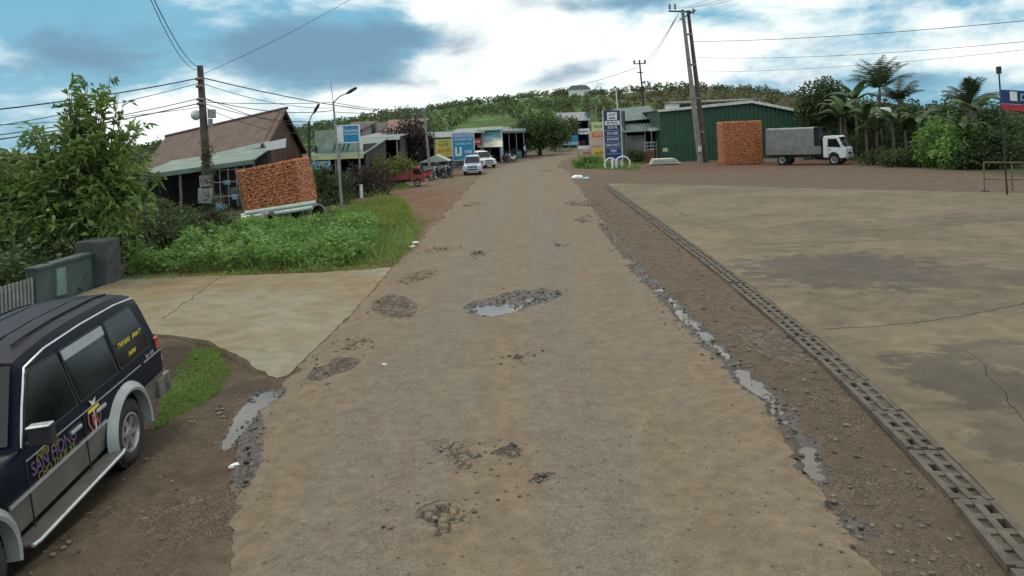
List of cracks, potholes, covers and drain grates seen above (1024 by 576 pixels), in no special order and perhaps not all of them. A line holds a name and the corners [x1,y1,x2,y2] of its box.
pothole [461,288,563,317]
pothole [526,472,551,485]
pothole [825,499,881,542]
pothole [625,263,836,487]
crack [739,303,1024,365]
pothole [219,387,287,452]
pothole [493,444,524,459]
